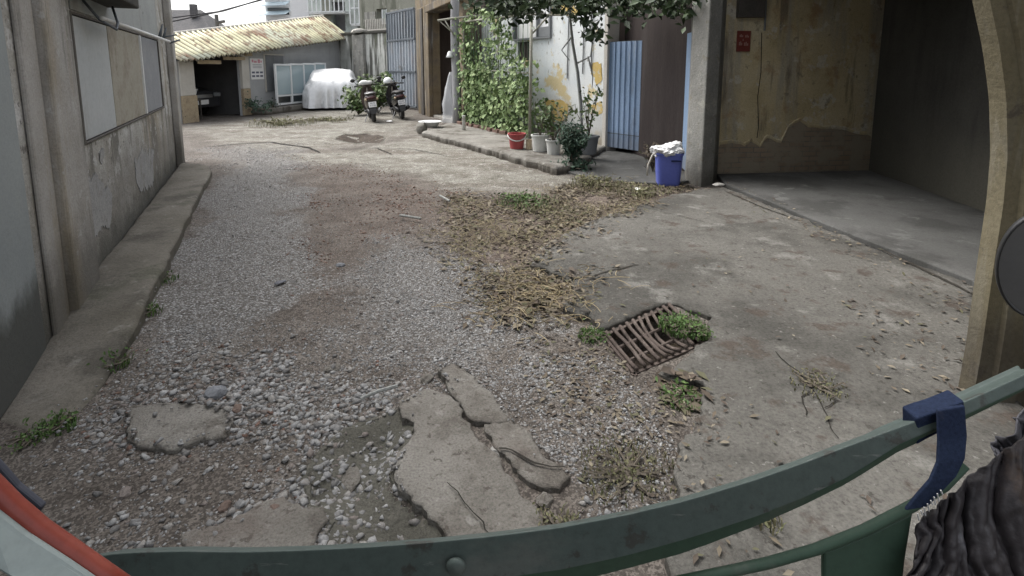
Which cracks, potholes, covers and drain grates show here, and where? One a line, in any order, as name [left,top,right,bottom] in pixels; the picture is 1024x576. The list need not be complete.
drain grate [603,302,709,376]
crack [447,447,565,532]
crack [212,142,319,152]
